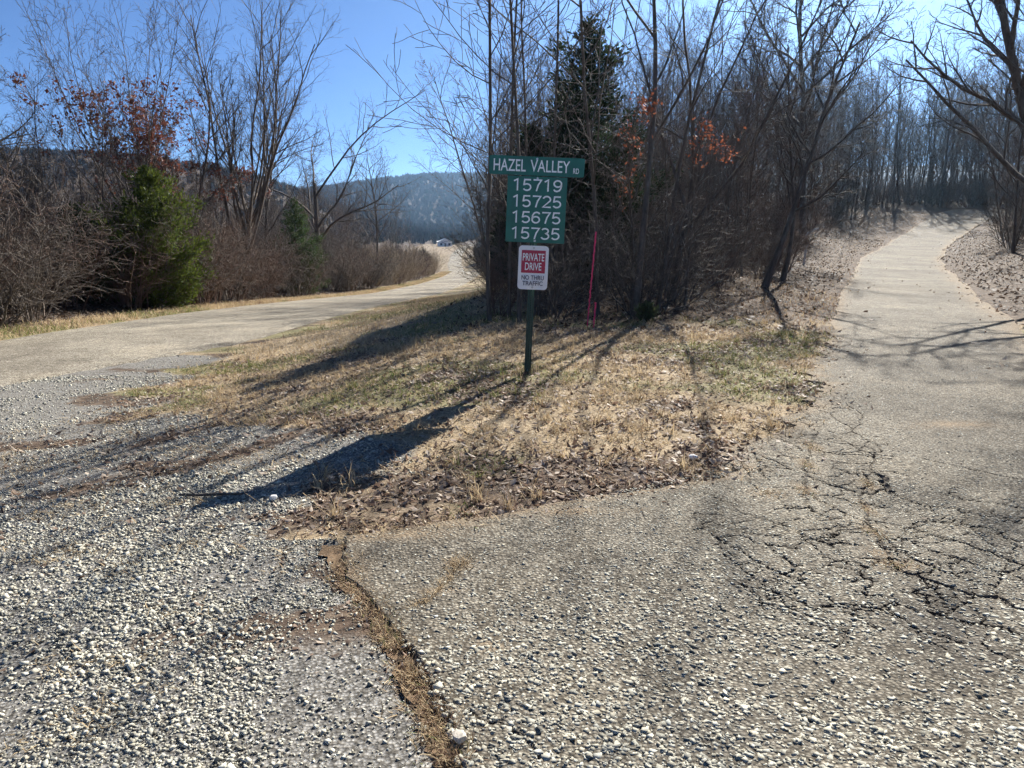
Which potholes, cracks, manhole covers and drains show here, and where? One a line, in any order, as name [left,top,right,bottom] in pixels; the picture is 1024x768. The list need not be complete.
crack [693,402,1024,668]
crack [302,537,541,768]
